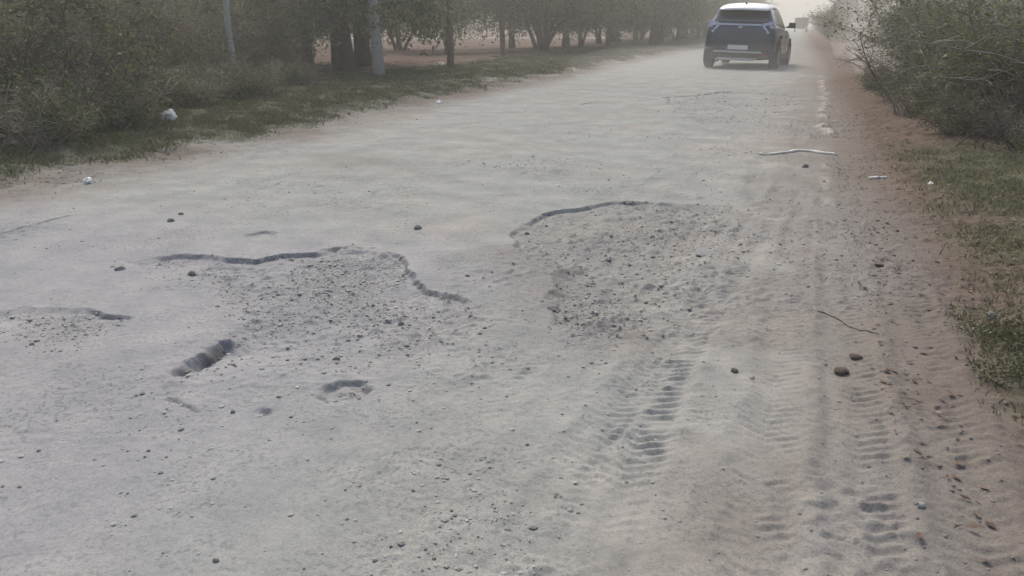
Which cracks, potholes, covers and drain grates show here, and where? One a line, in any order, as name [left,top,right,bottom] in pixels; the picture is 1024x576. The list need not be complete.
pothole [100,245,496,379]
crack [0,215,72,234]
pothole [311,378,375,408]
